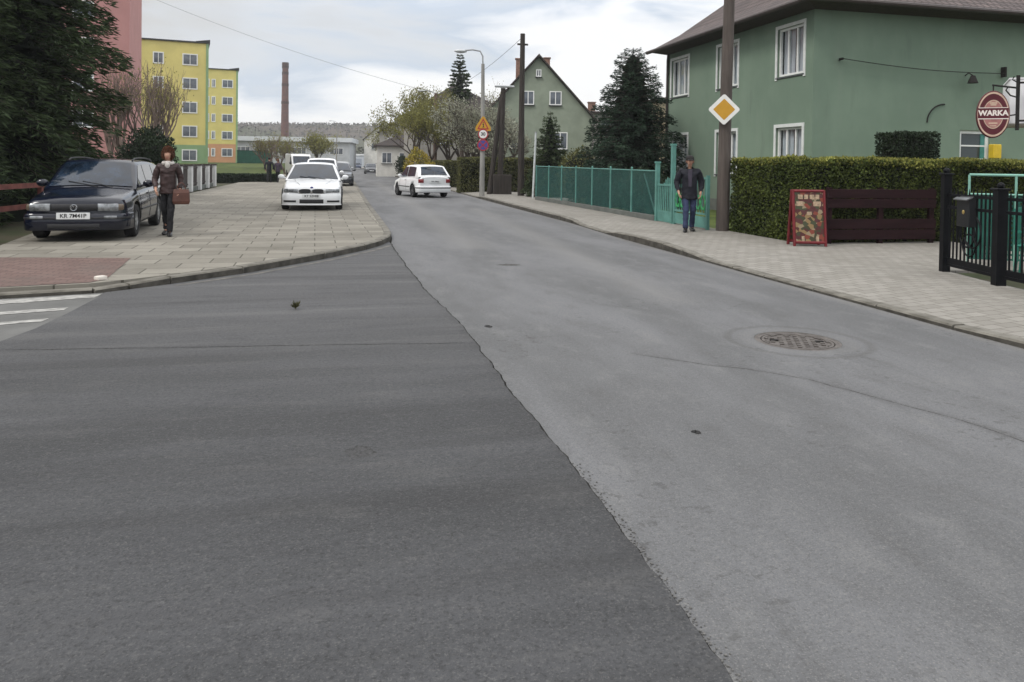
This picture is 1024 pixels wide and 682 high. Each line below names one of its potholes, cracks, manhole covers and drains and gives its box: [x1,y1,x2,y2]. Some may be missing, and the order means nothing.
manhole cover [754,332,842,351]
